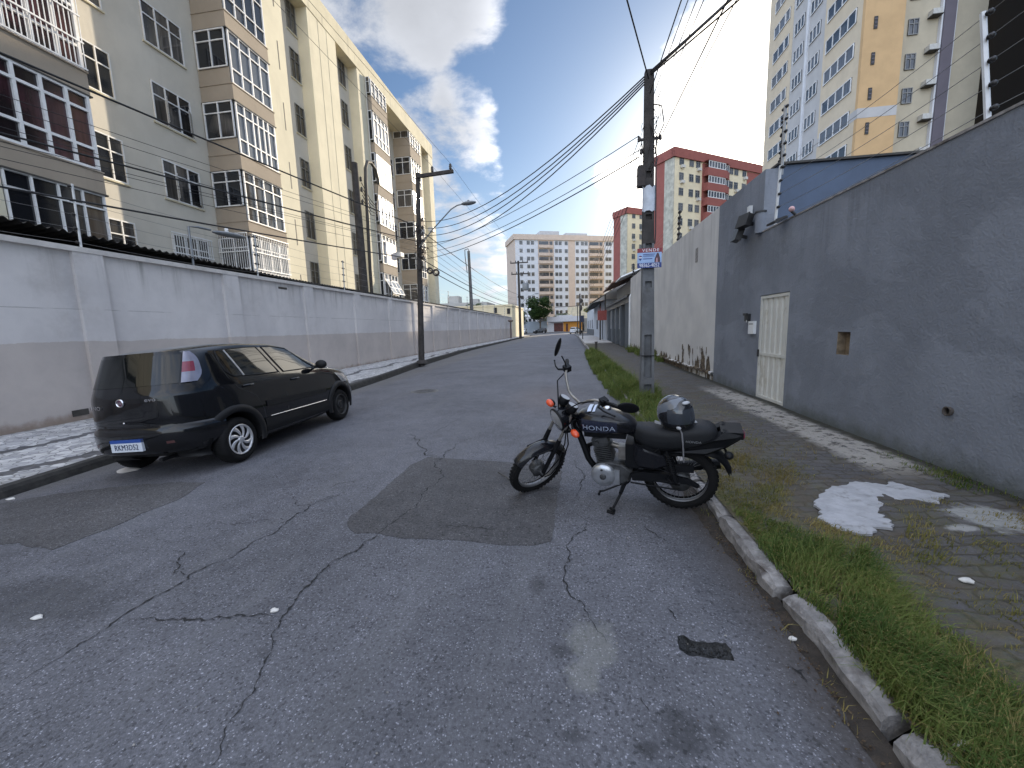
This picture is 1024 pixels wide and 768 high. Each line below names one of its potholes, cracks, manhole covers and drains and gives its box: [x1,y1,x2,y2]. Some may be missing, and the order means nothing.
crack [563,460,606,640]
pothole [677,635,734,661]
crack [16,419,458,766]
